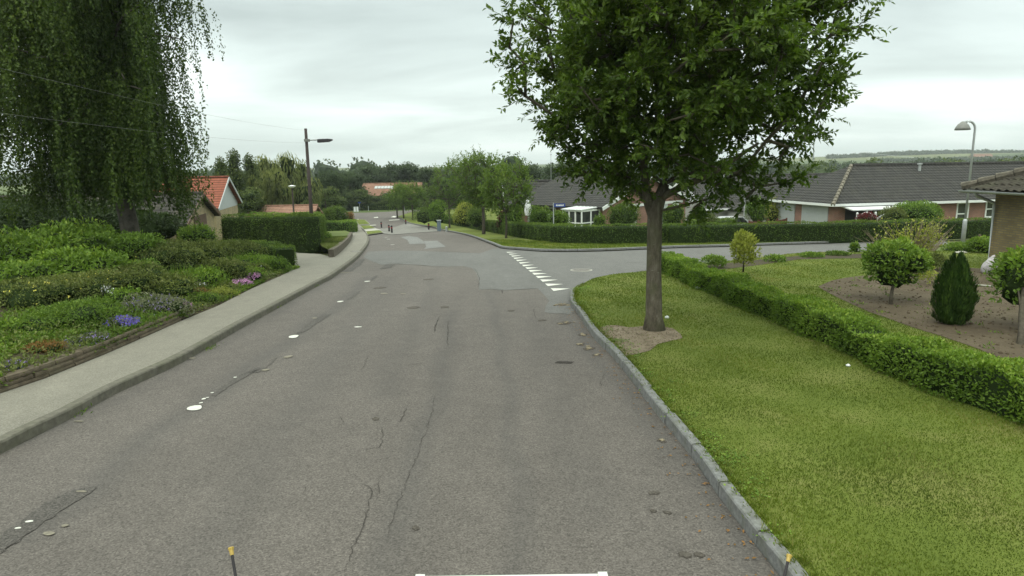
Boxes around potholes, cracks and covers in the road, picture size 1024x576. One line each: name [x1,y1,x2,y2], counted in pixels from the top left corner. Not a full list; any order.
crack [344,396,435,571]
